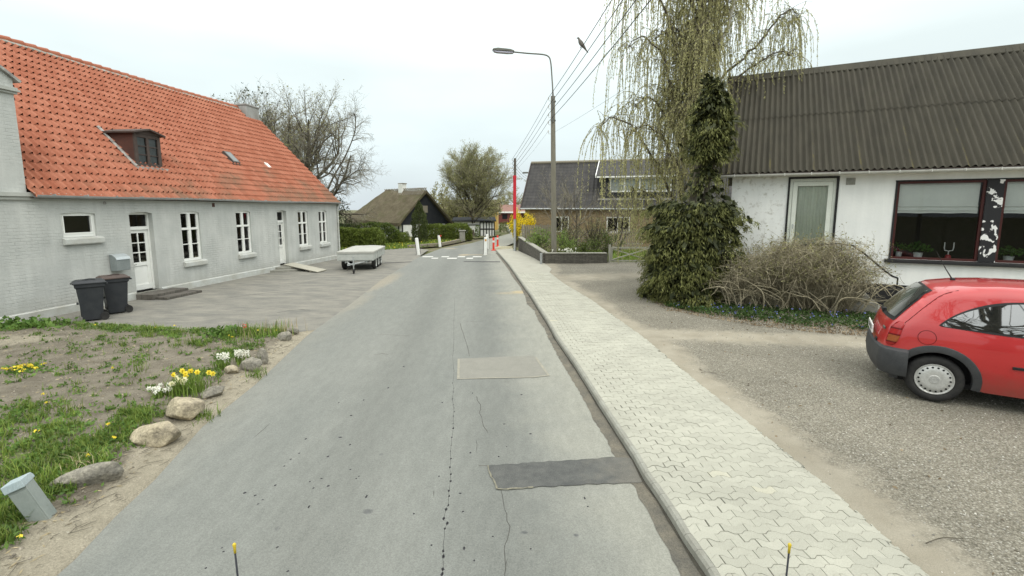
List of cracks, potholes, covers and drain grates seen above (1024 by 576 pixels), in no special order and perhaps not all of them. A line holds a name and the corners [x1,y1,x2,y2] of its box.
crack [501,492,511,576]
